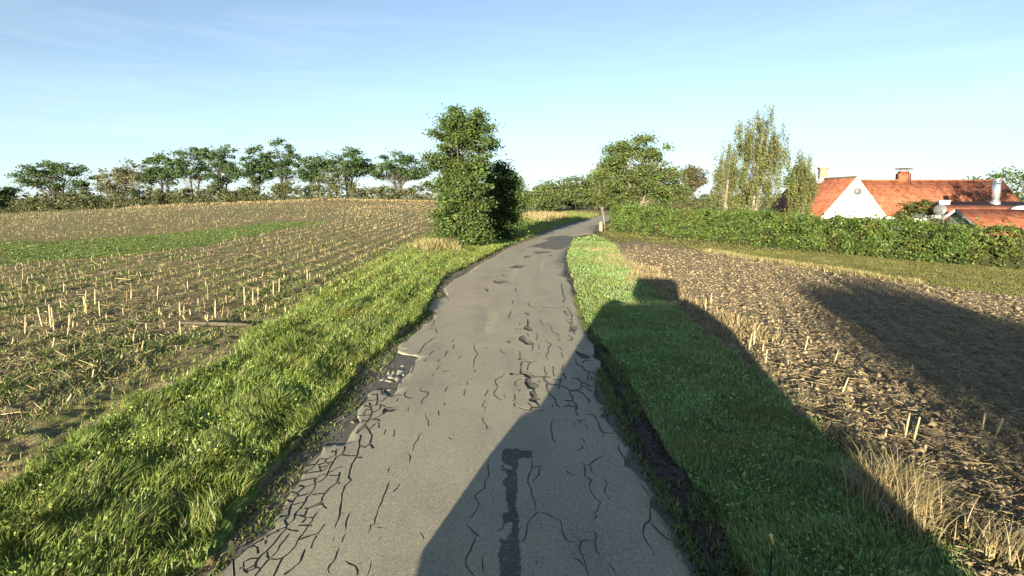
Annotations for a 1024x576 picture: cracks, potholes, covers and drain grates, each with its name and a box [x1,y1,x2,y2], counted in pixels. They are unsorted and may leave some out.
crack [216,283,669,576]
